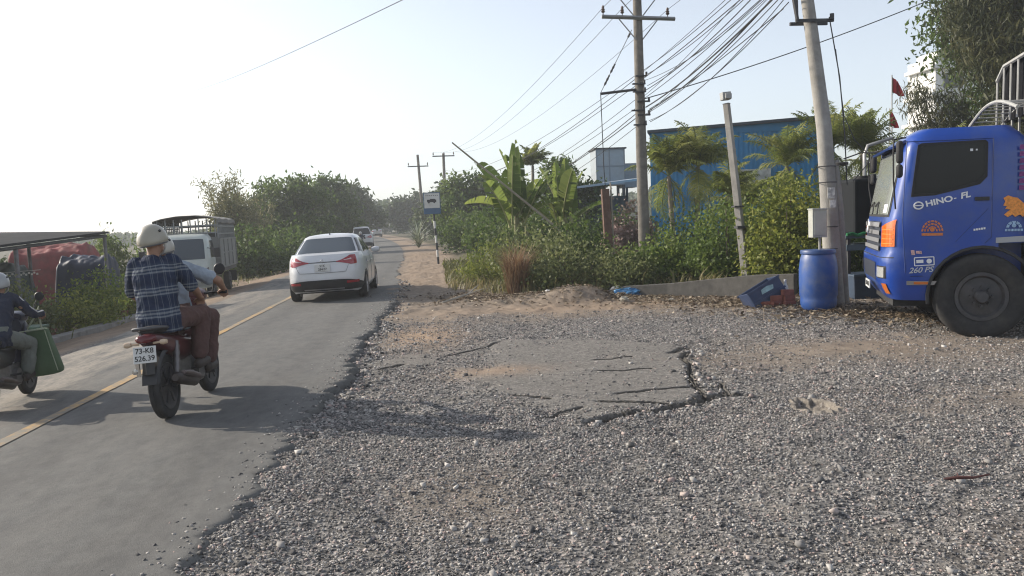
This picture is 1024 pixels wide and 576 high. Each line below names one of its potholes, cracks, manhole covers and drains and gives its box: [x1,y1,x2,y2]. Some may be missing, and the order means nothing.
crack [445,341,499,357]
crack [512,347,739,423]
